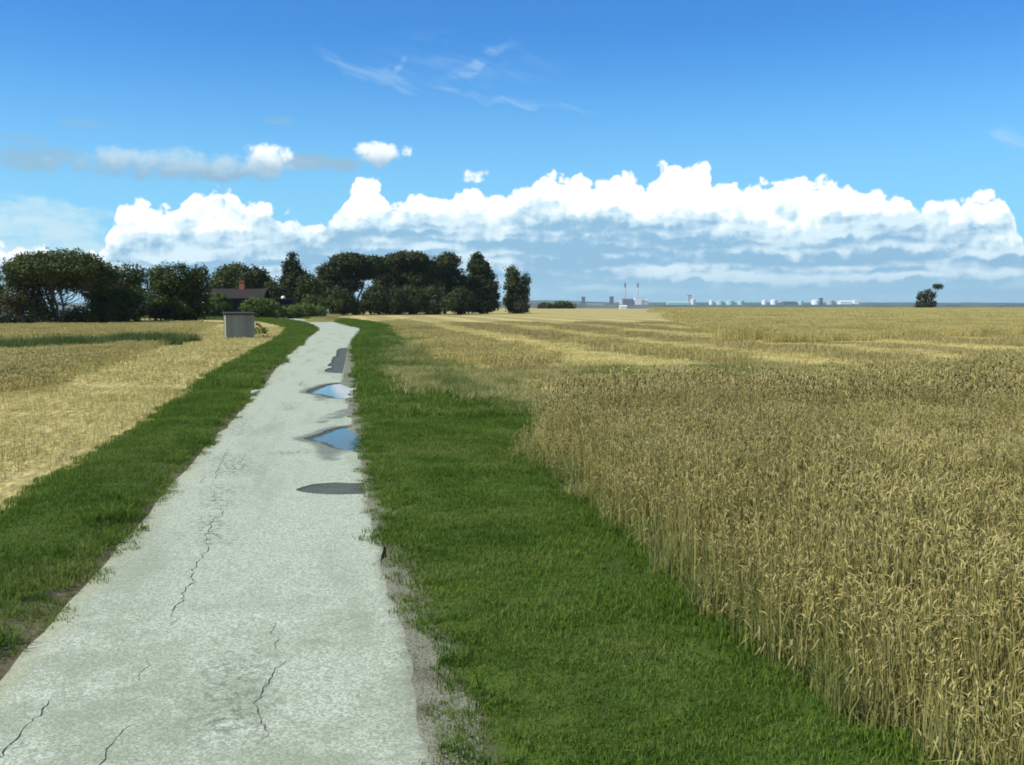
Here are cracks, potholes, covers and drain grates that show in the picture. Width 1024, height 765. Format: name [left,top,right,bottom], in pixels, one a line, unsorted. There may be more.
crack [254,623,294,745]
pothole [306,383,356,398]
crack [99,723,136,765]
crack [0,699,51,758]
pothole [303,426,366,450]
crack [166,447,259,634]
